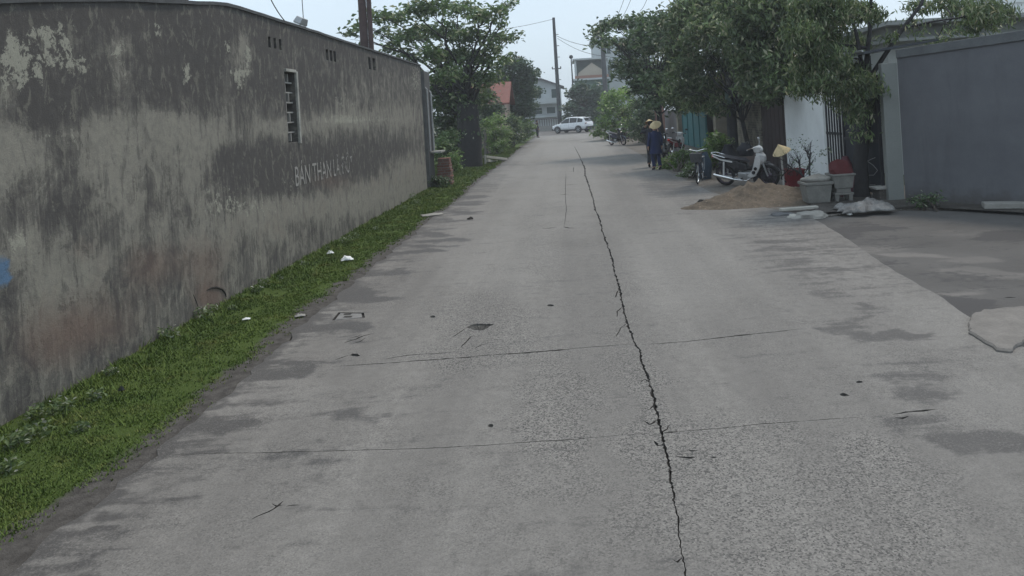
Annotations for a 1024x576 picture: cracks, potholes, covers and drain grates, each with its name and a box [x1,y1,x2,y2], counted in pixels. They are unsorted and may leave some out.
crack [895,409,935,419]
crack [176,148,855,576]
manhole cover [333,312,365,320]
